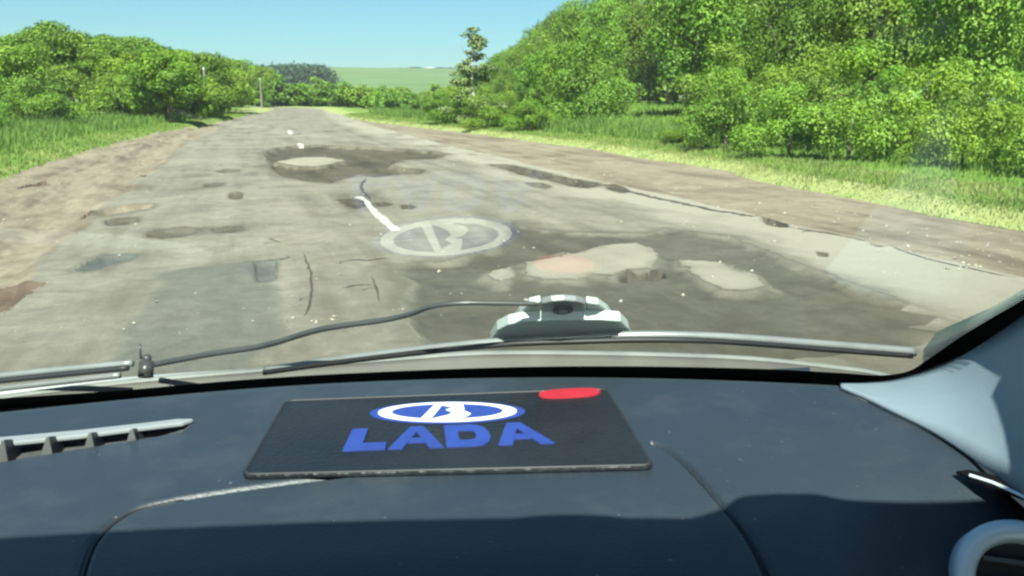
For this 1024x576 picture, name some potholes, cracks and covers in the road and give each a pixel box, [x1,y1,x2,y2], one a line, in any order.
pothole [262,145,451,183]
crack [340,258,381,302]
crack [242,238,313,314]
pothole [488,164,602,188]
pothole [603,184,630,193]
pothole [74,254,139,272]
pothole [761,216,789,228]
pothole [104,217,140,226]
pothole [145,227,203,239]
pothole [337,199,366,209]
